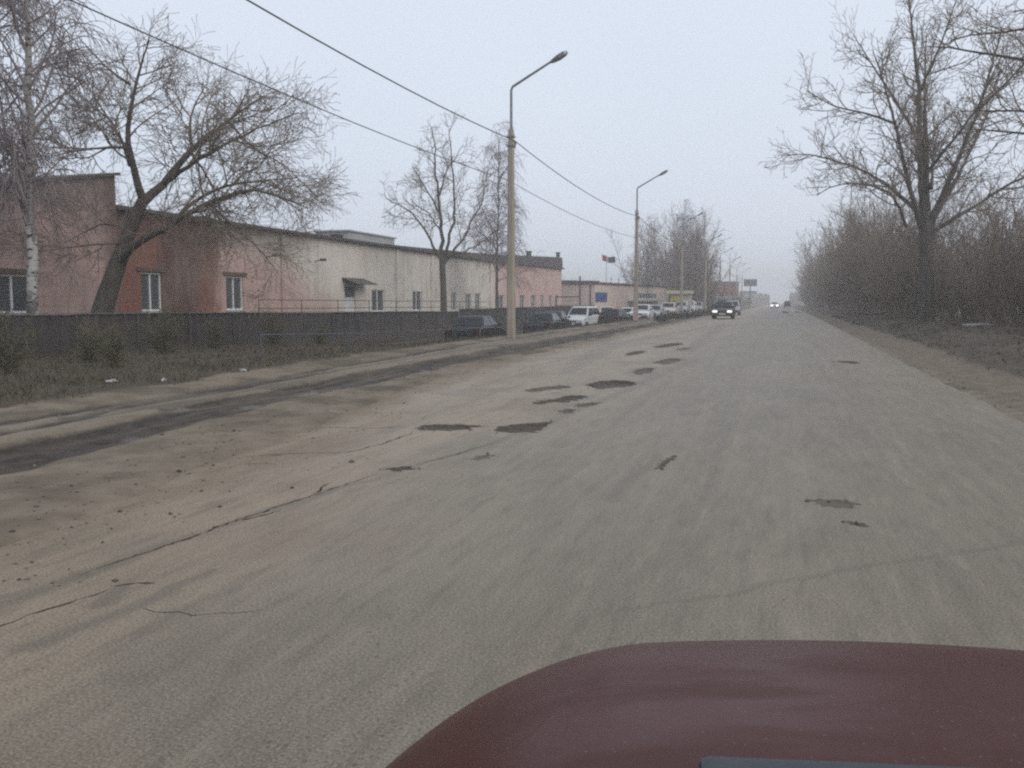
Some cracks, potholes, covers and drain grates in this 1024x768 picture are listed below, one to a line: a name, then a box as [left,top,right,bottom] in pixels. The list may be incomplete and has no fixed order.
pothole [810,498,861,508]
pothole [584,380,637,389]
crack [0,582,154,627]
pothole [494,422,553,433]
crack [235,426,412,464]
crack [144,608,264,616]
pothole [532,395,588,404]
